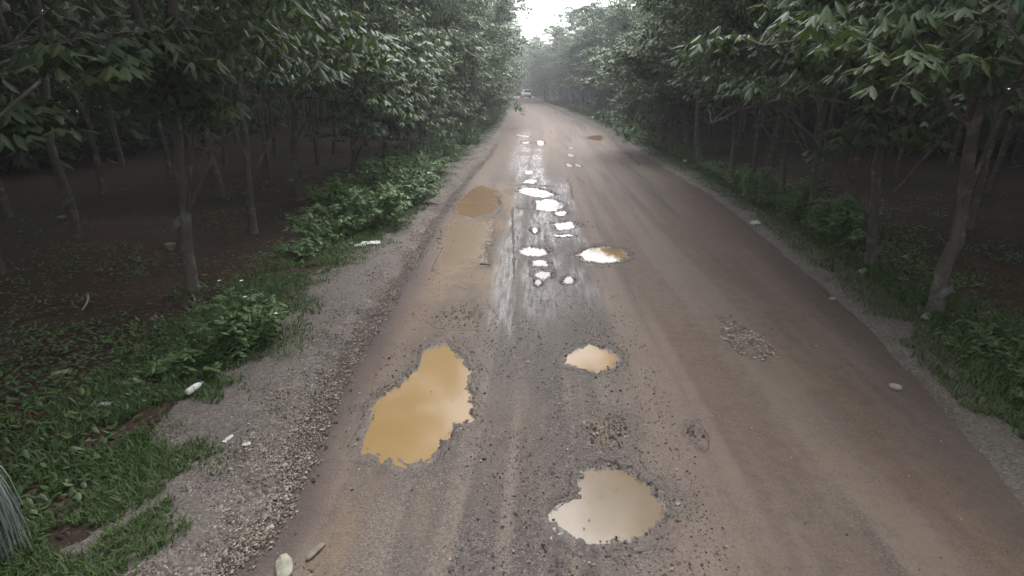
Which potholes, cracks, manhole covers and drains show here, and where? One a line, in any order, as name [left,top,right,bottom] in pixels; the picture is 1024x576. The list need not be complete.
pothole [448,184,502,221]
pothole [564,405,642,468]
pothole [546,219,586,232]
pothole [552,339,630,377]
pothole [529,269,555,281]
pothole [430,214,496,277]
pothole [514,244,554,259]
pothole [560,275,576,286]
pothole [345,335,487,482]
pothole [683,420,710,451]
pothole [528,258,552,268]
pothole [532,197,569,213]
